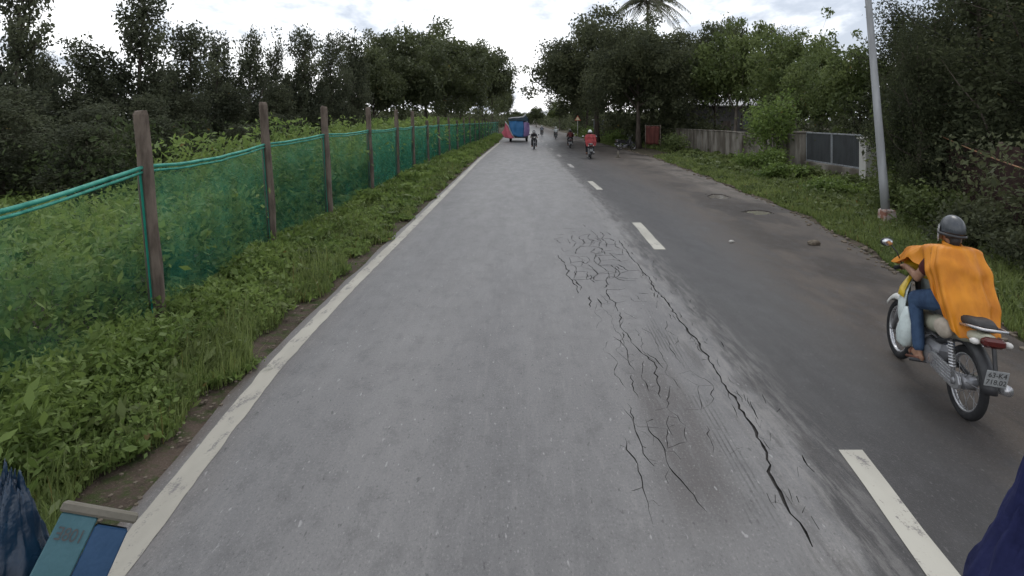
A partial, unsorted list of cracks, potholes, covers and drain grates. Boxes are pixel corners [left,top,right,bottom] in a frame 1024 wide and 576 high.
crack [555,225,819,547]
